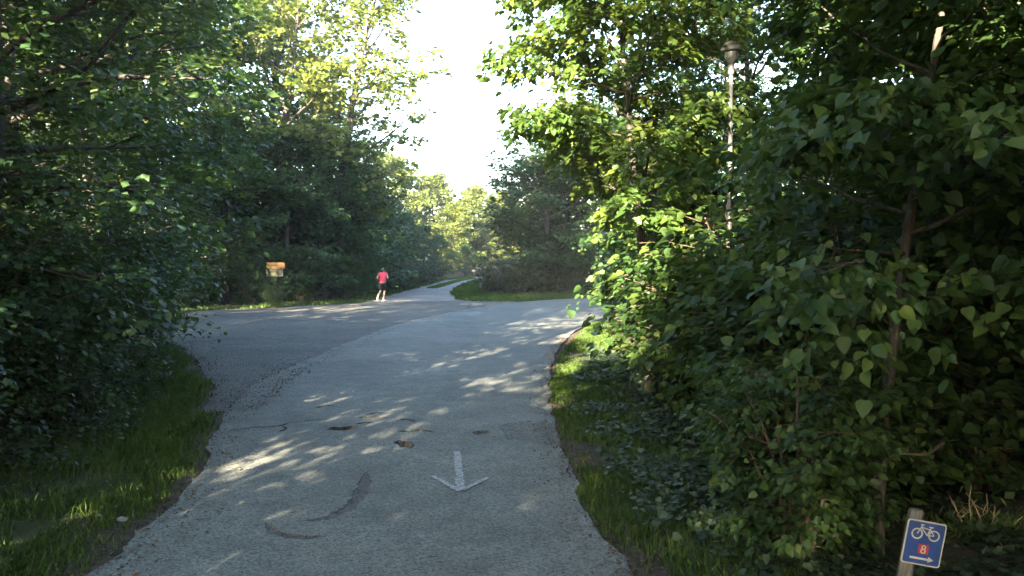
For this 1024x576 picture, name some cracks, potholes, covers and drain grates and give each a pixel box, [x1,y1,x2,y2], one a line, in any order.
crack [264,472,372,539]
crack [230,405,332,432]
pothole [394,440,415,448]
